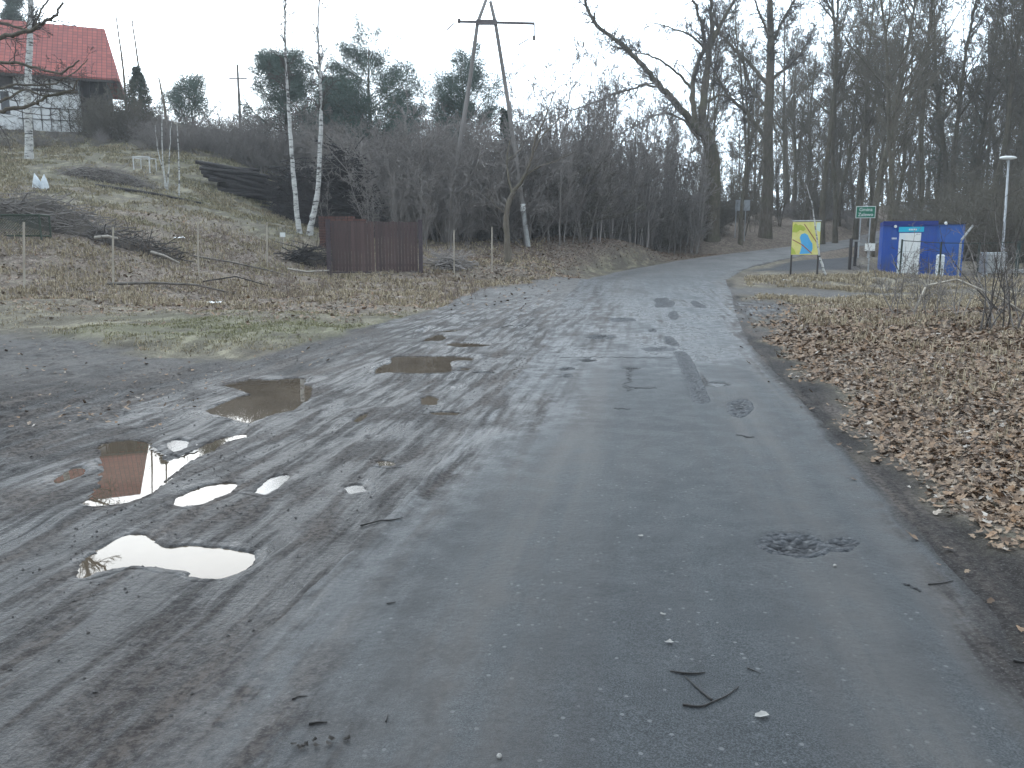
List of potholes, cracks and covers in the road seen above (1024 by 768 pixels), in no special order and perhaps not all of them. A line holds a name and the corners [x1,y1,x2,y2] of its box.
pothole [412,394,447,407]
pothole [726,399,754,418]
pothole [369,355,480,375]
pothole [197,376,321,424]
pothole [49,527,270,582]
pothole [654,297,675,308]
pothole [77,435,249,508]
pothole [754,533,831,558]
crack [560,356,664,391]
pothole [237,471,301,497]
